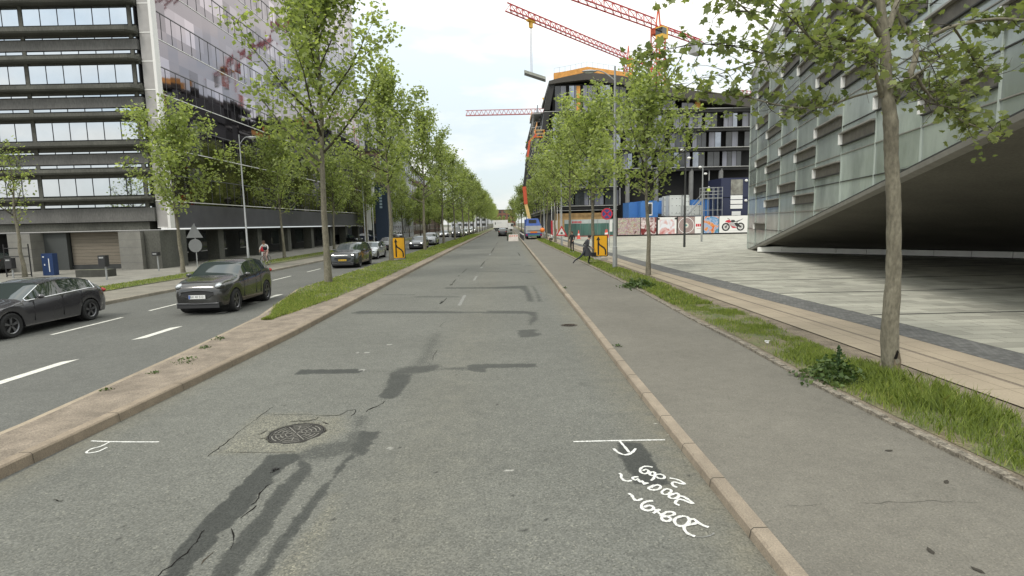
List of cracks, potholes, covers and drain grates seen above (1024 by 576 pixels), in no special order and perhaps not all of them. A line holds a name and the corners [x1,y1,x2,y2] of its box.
manhole cover [266,423,325,444]
crack [230,484,270,549]
crack [260,402,384,439]
crack [158,530,213,576]
